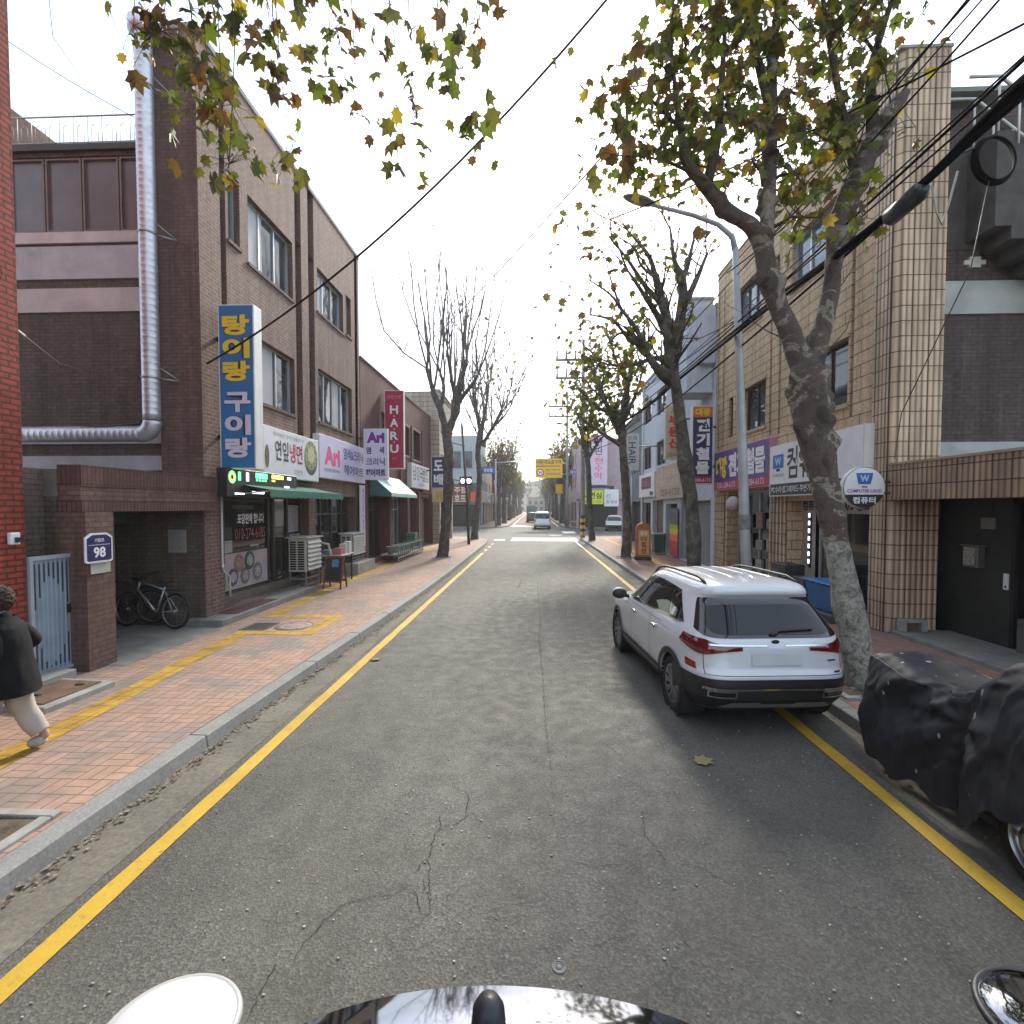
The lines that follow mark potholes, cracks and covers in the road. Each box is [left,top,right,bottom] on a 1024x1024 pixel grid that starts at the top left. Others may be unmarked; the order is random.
manhole cover [274,622,314,630]
crack [249,776,489,1016]
